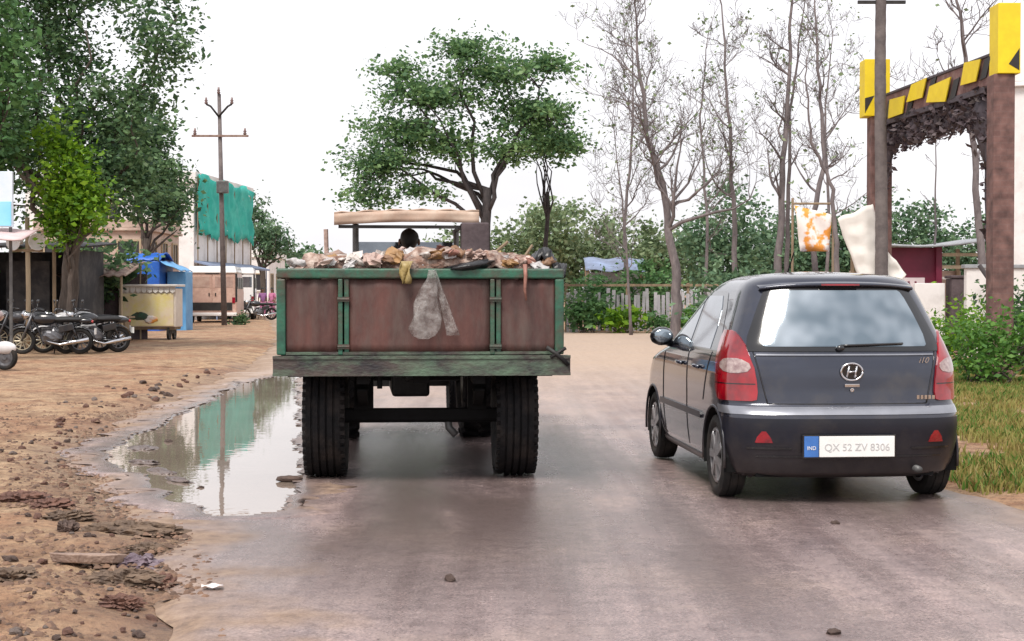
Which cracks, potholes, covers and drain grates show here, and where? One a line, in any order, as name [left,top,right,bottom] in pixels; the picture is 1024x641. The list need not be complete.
pothole [57,374,357,520]
